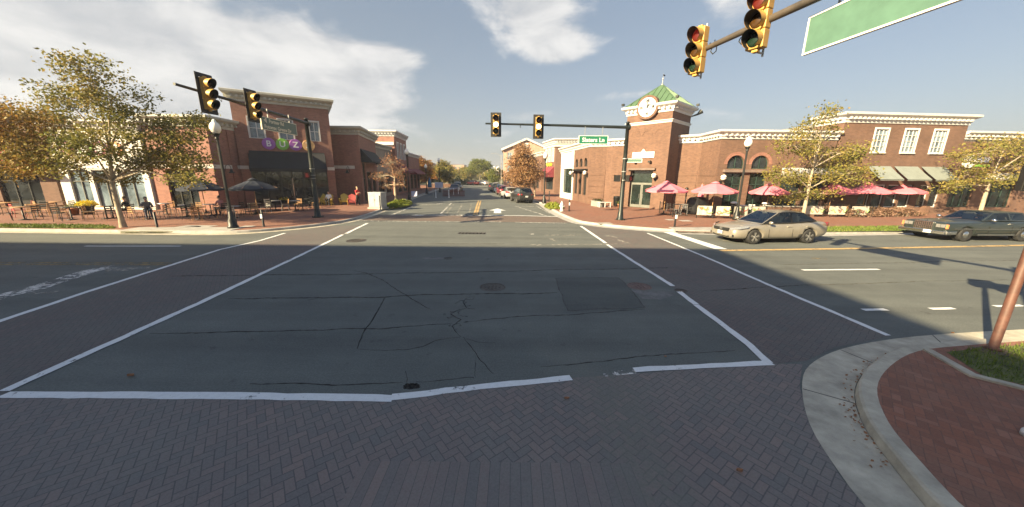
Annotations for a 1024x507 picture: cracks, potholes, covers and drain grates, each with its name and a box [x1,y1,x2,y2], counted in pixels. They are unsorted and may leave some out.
crack [157,268,639,386]
manhole cover [627,282,652,290]
manhole cover [479,283,506,292]
